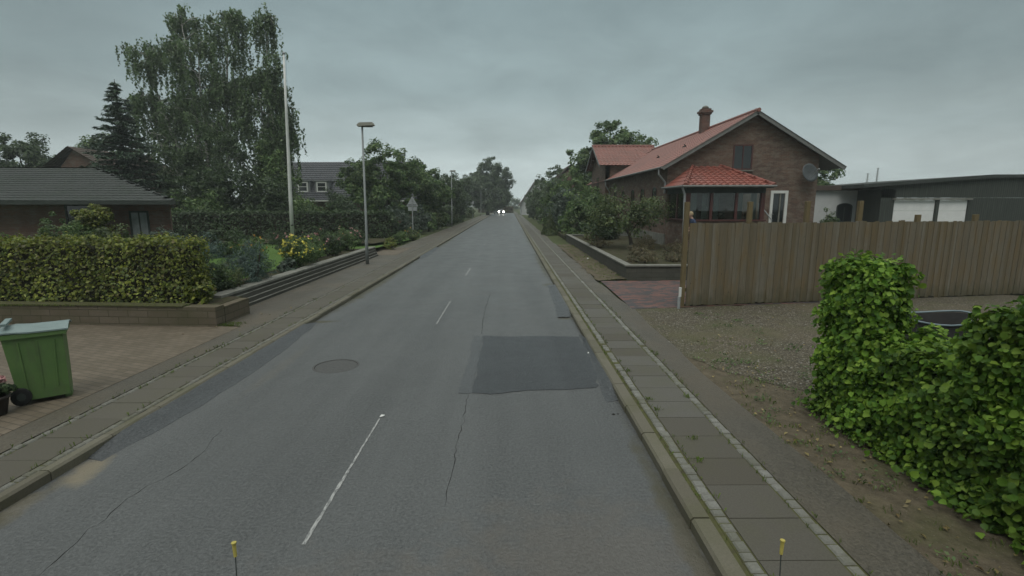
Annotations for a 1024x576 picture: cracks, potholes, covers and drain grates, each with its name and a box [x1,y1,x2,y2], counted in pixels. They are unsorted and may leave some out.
manhole cover [312,359,360,373]
crack [41,432,220,574]
